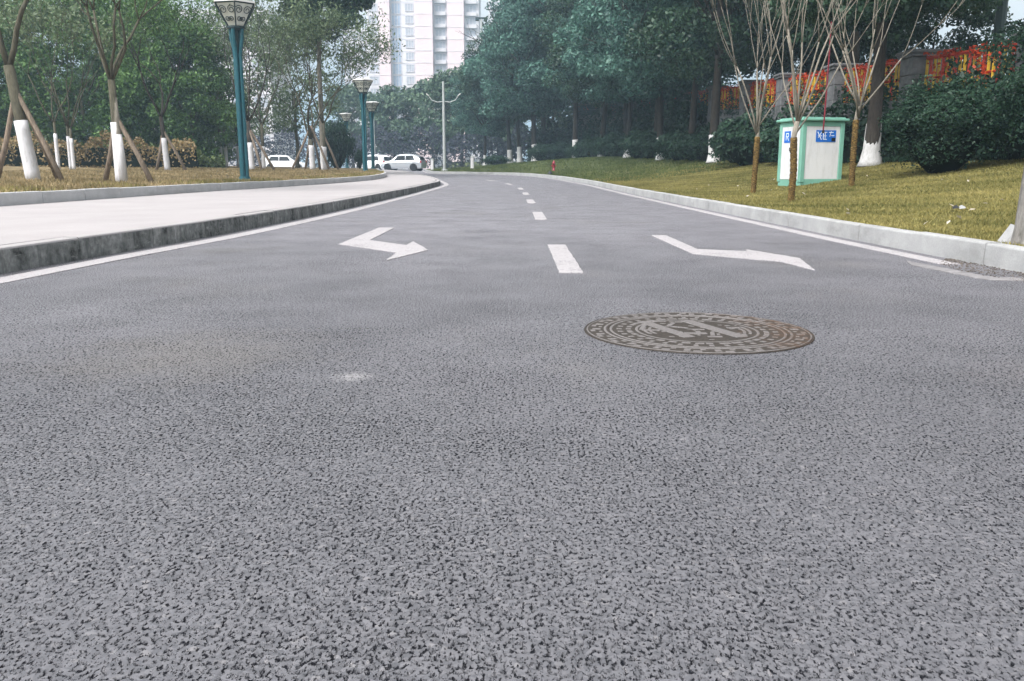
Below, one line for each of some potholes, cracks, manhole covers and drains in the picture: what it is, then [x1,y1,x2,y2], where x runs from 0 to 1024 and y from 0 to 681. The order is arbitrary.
manhole cover [584,312,815,355]
